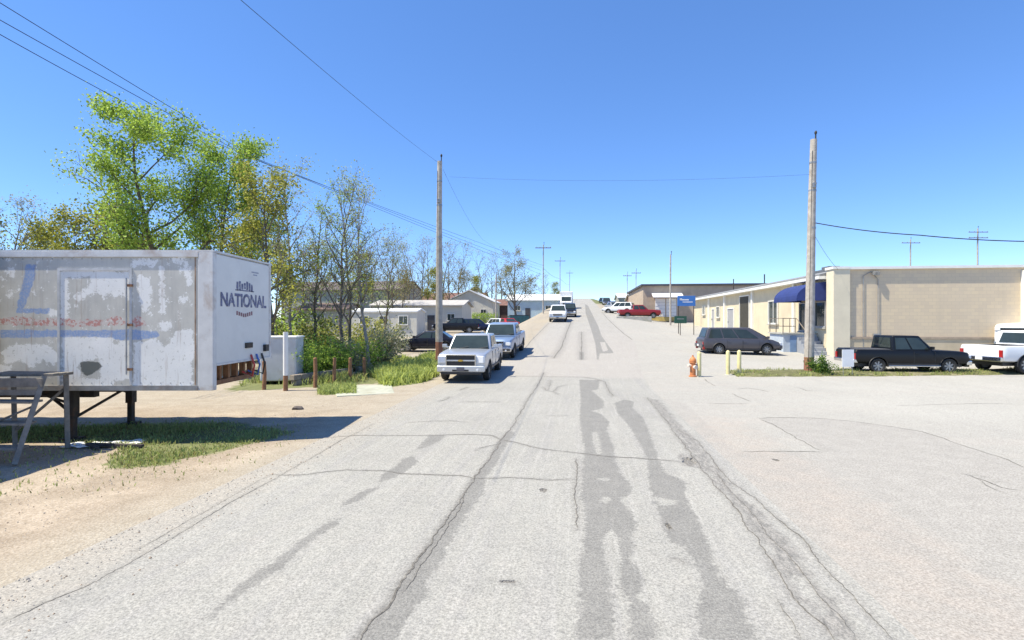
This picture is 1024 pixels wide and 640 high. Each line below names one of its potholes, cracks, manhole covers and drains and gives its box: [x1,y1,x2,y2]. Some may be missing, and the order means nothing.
crack [716,388,1021,466]
crack [301,373,656,640]
crack [649,400,890,639]
